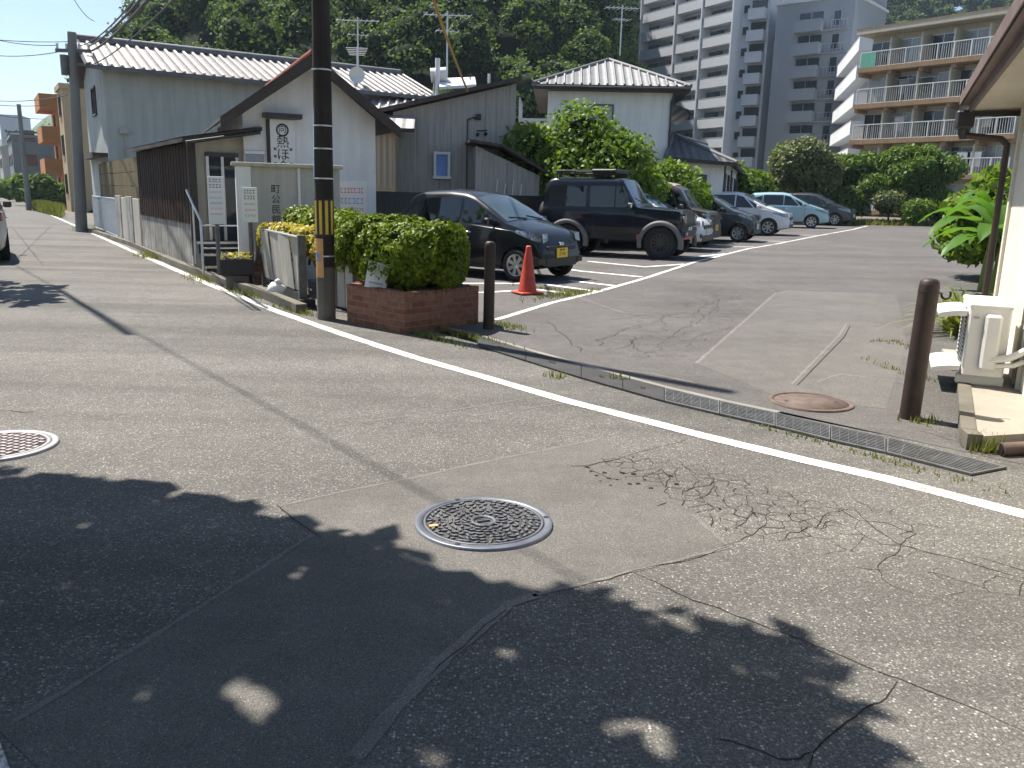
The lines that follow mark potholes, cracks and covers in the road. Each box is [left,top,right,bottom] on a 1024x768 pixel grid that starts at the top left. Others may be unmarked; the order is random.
drain grate [831,425,886,454]
drain grate [886,437,1007,476]
manhole cover [768,392,855,413]
crack [546,269,807,357]
drain grate [720,401,775,428]
crack [585,439,1024,595]
drain grate [775,412,830,441]
drain grate [665,388,719,415]
manhole cover [414,497,553,552]
crack [634,572,1024,768]
manhole cover [0,430,59,462]
